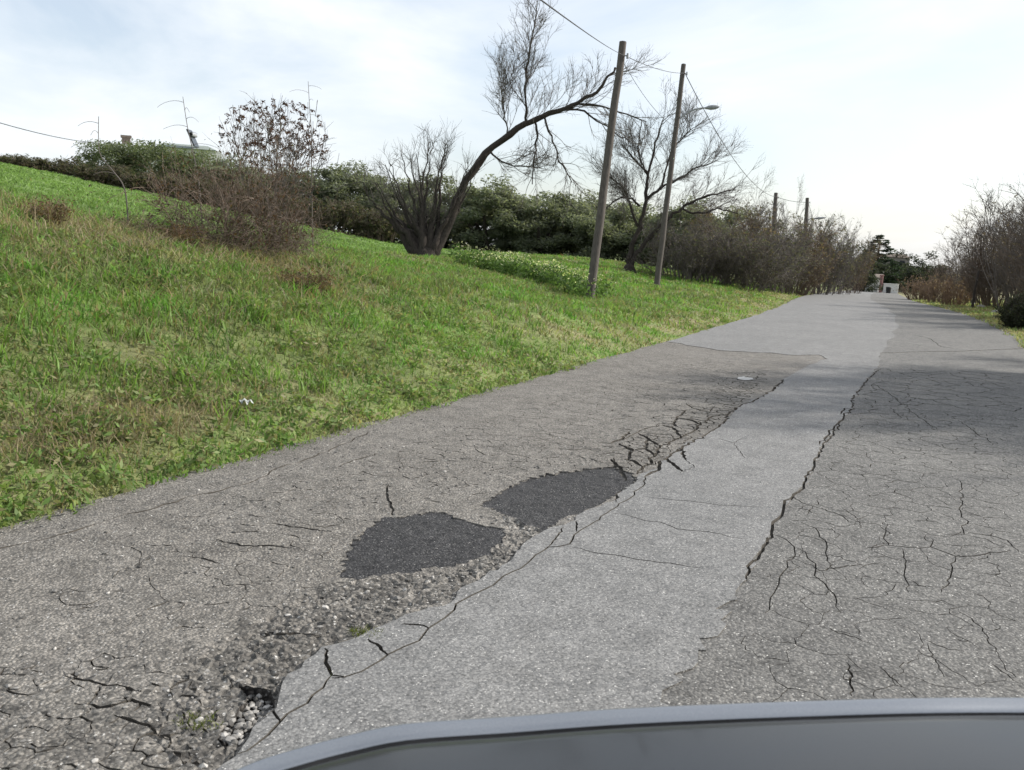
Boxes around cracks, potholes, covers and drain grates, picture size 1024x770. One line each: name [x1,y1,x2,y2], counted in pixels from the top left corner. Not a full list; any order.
crack [0,362,1022,770]
pothole [217,685,277,750]
